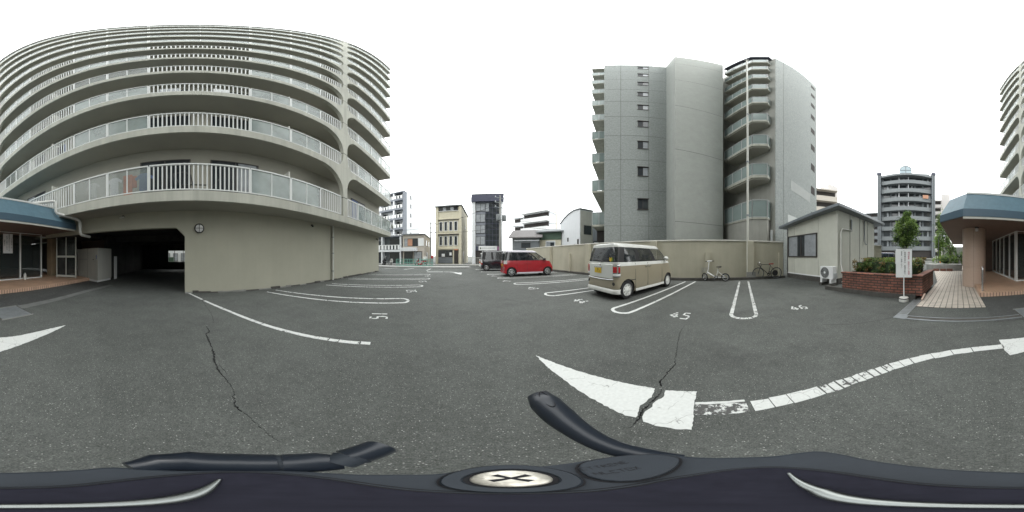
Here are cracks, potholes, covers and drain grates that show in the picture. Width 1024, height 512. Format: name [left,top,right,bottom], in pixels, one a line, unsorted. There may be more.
crack [630,327,684,428]
crack [200,293,282,443]
